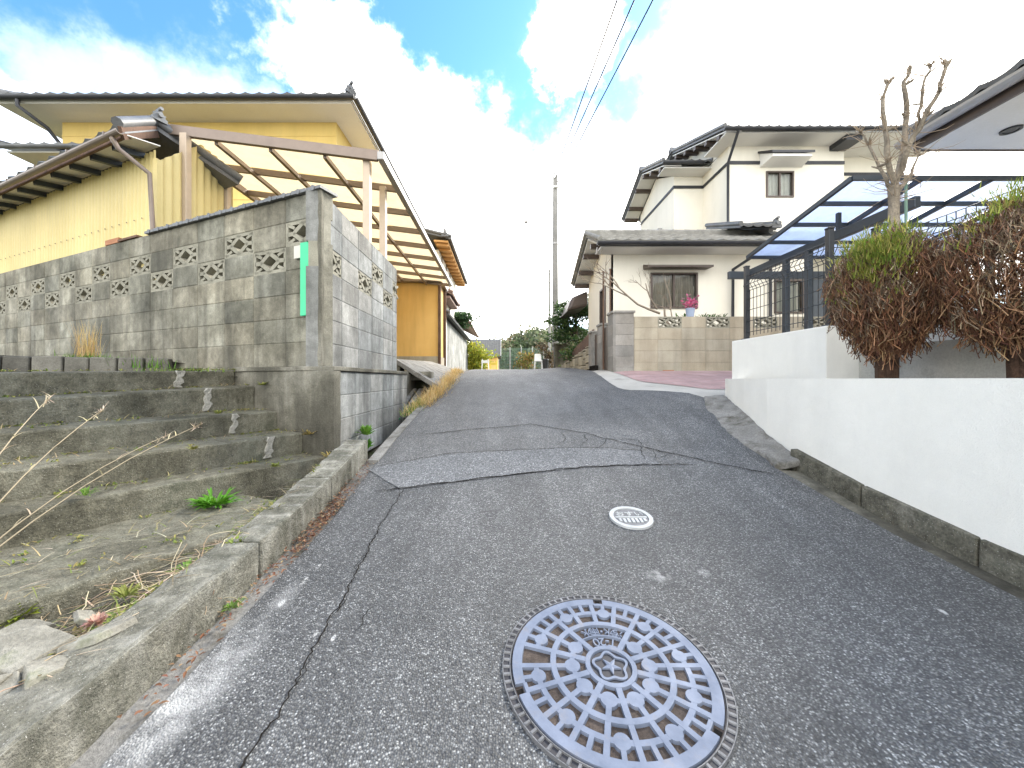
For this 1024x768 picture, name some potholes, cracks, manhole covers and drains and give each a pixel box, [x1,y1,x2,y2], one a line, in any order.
manhole cover [502,595,738,768]
manhole cover [609,506,654,530]
